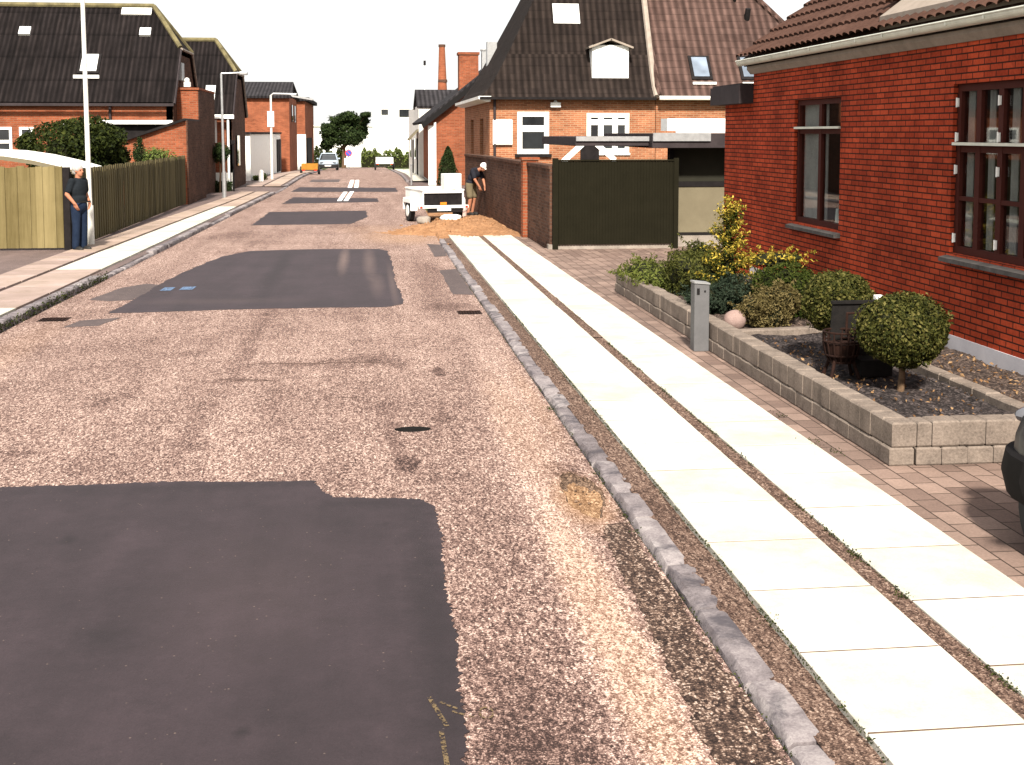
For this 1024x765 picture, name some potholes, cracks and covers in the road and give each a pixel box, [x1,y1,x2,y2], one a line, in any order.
pothole [559,471,606,518]
